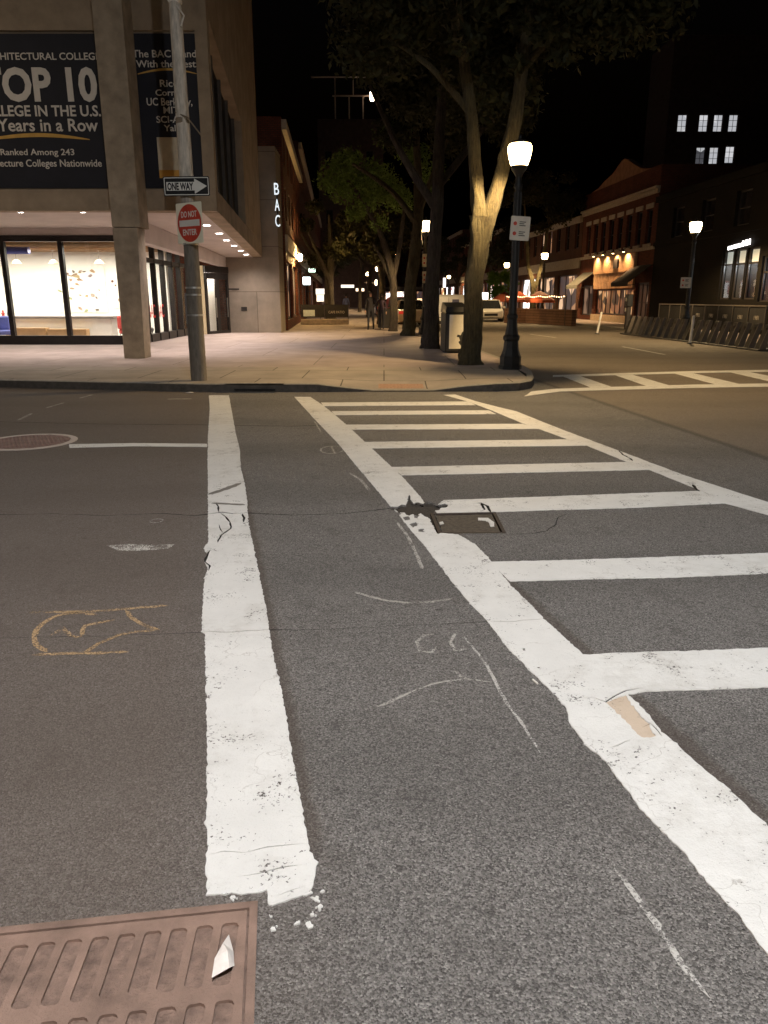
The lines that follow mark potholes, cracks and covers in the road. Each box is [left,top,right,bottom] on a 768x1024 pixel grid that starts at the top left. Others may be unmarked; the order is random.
crack [0,504,389,571]
pothole [386,496,448,532]
manhole cover [0,434,78,451]
drain grate [0,900,258,1024]
utility cover [430,512,506,534]
